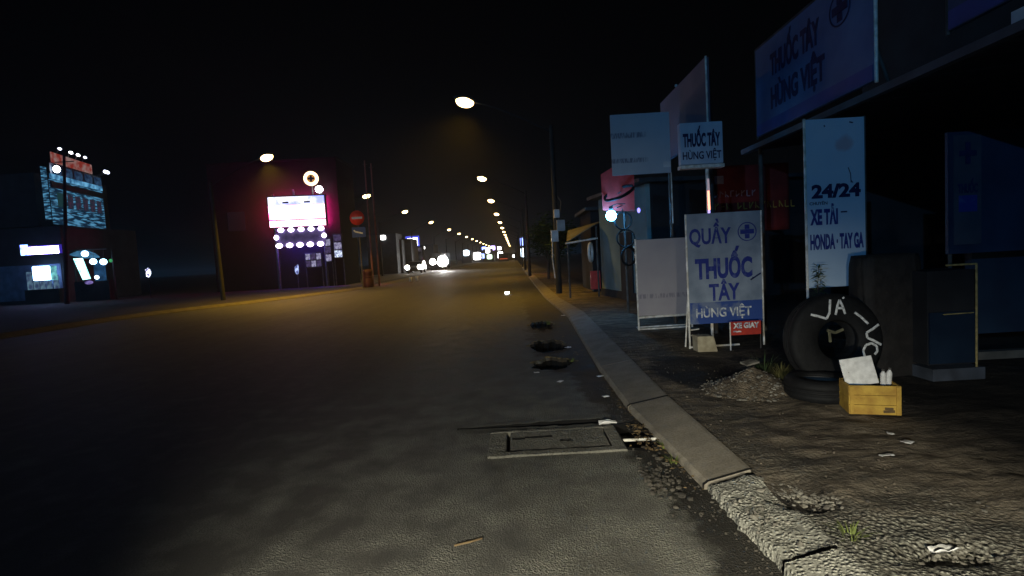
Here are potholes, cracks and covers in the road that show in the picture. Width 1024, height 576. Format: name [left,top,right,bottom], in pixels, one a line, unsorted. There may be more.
manhole cover [487,425,628,459]
pothole [527,321,556,331]
pothole [526,356,579,371]
crack [459,416,612,430]
pothole [526,339,572,354]
